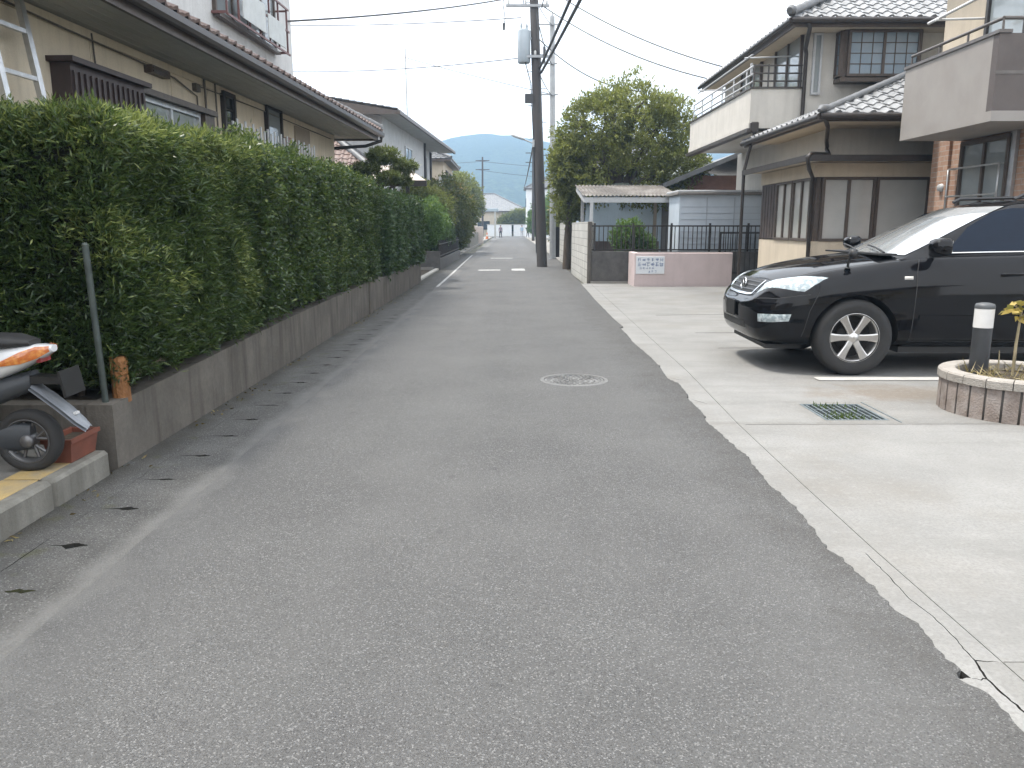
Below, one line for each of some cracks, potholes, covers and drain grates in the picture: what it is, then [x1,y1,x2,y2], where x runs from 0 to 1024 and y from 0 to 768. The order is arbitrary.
manhole cover [540,374,608,386]
crack [869,557,1024,712]
drain grate [800,401,901,422]
